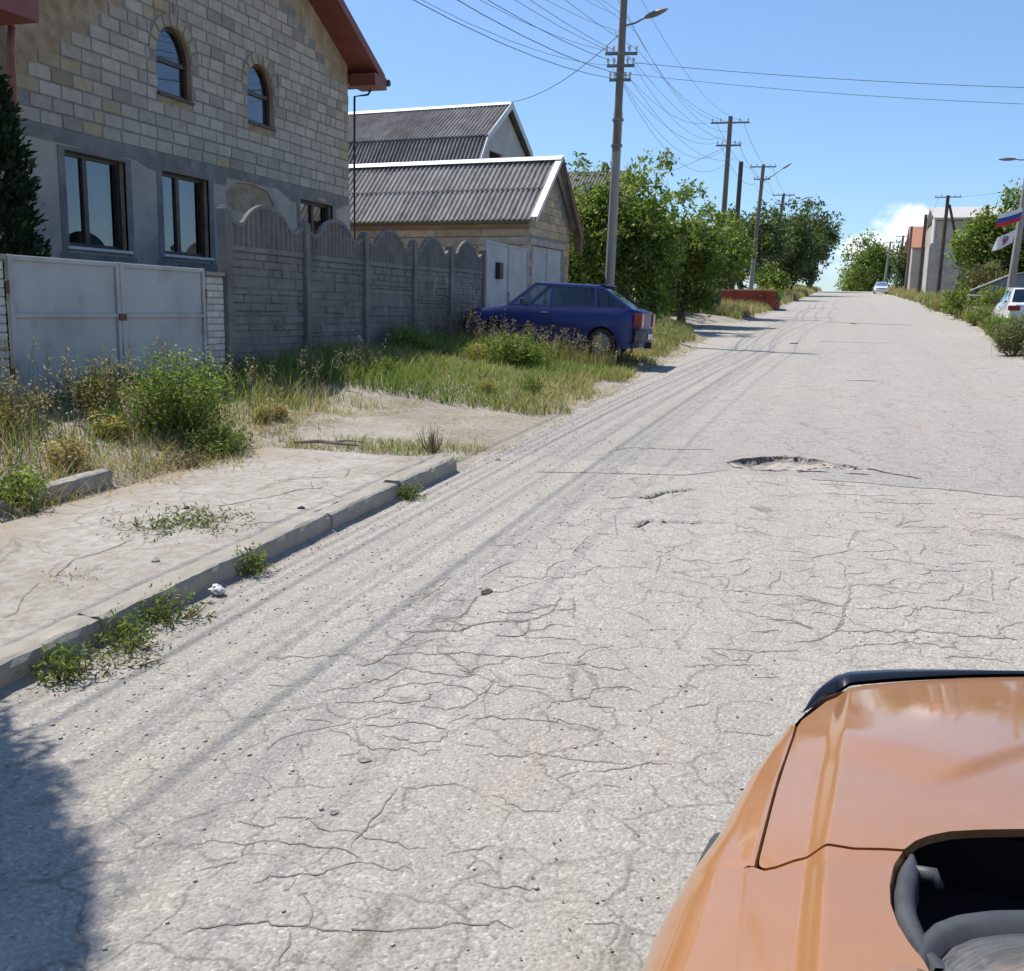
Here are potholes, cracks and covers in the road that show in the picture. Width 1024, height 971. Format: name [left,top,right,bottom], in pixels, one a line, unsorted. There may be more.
crack [494,795,557,812]
crack [448,845,533,890]
crack [183,783,512,965]
crack [267,490,722,756]
crack [655,465,1024,678]
pothole [726,455,862,471]
crack [467,744,672,787]
